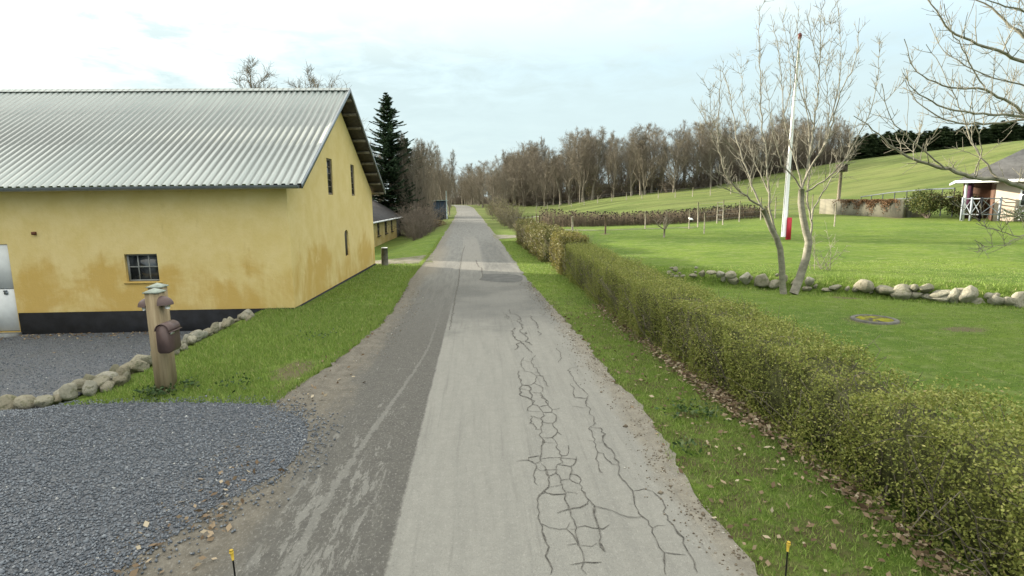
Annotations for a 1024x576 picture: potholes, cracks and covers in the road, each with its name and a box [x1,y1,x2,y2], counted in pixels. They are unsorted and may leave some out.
manhole cover [850,314,900,325]
crack [505,314,562,362]
crack [518,355,697,574]
